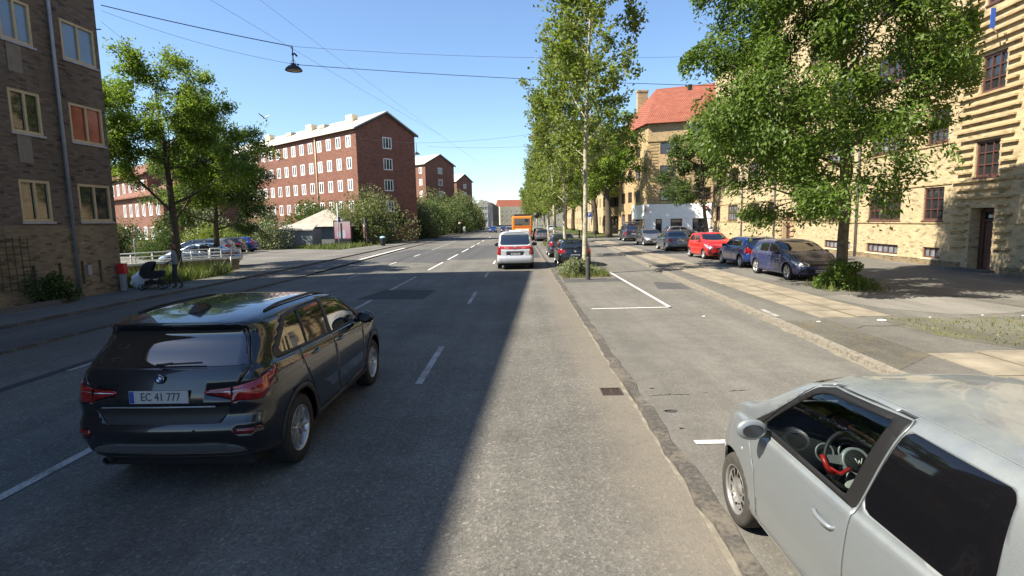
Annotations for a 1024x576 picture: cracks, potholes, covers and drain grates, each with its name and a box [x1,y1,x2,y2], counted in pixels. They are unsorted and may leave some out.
drain grate [600,388,624,396]
